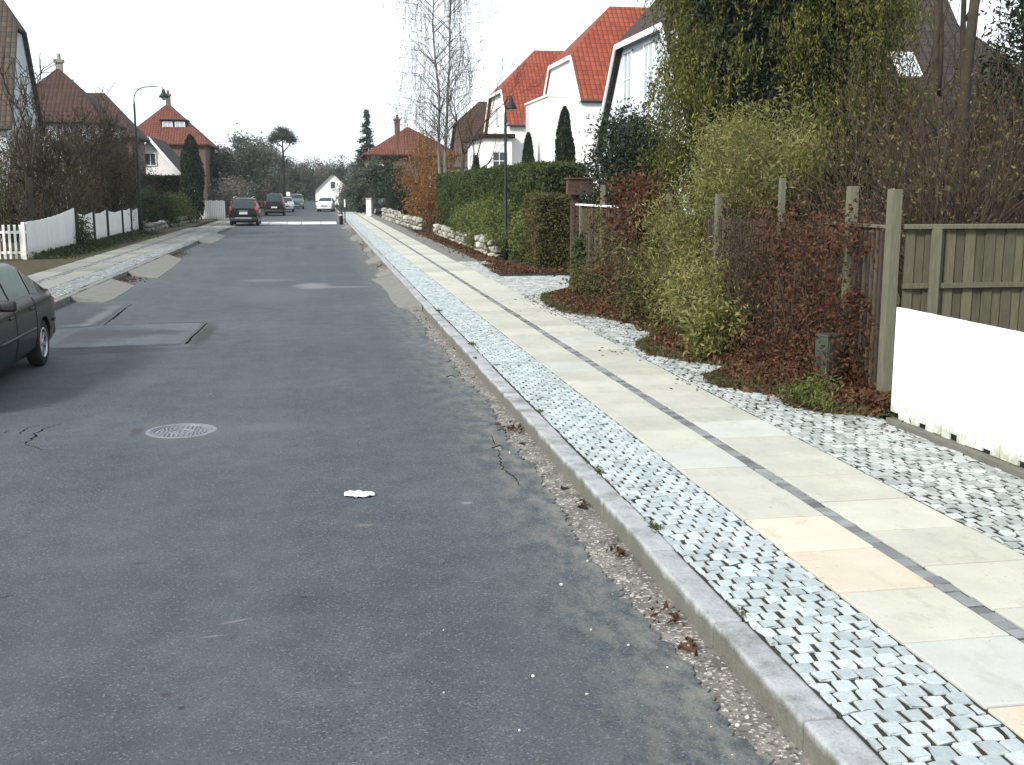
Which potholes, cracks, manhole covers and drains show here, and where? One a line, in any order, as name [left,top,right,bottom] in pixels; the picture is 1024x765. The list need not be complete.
crack [4,424,60,450]
manhole cover [145,423,217,438]
